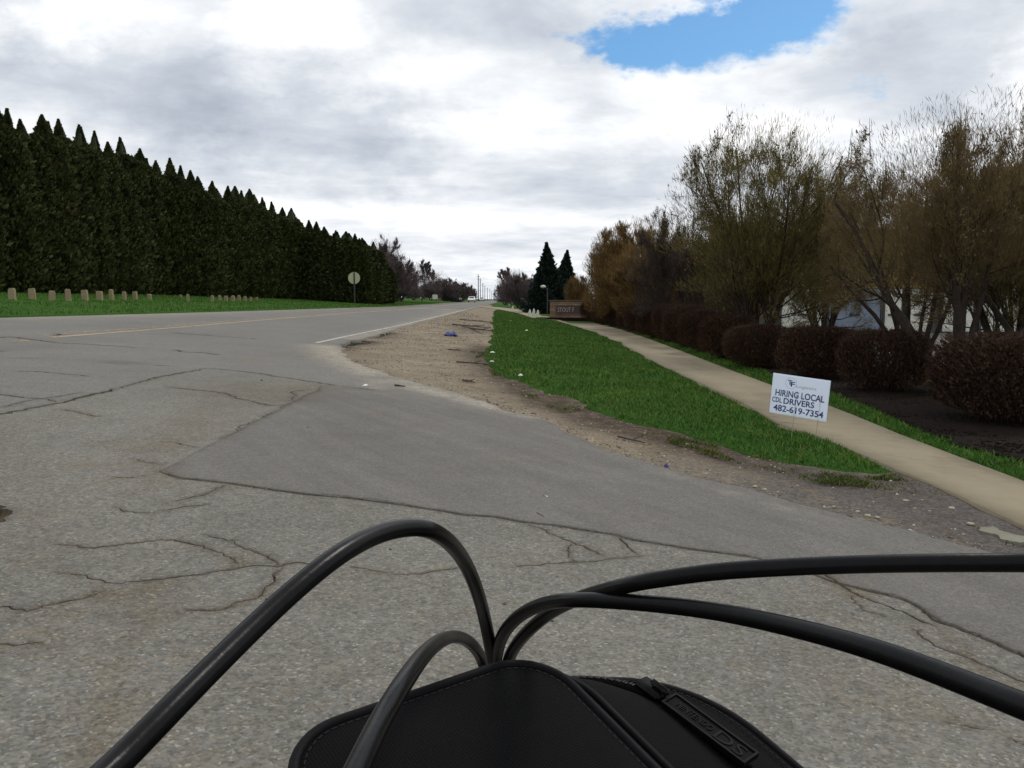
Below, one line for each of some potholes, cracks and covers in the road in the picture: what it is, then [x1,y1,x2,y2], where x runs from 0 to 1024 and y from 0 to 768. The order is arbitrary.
crack [827,577,1024,683]
crack [519,527,639,567]
pothole [0,505,13,523]
crack [2,535,308,612]
